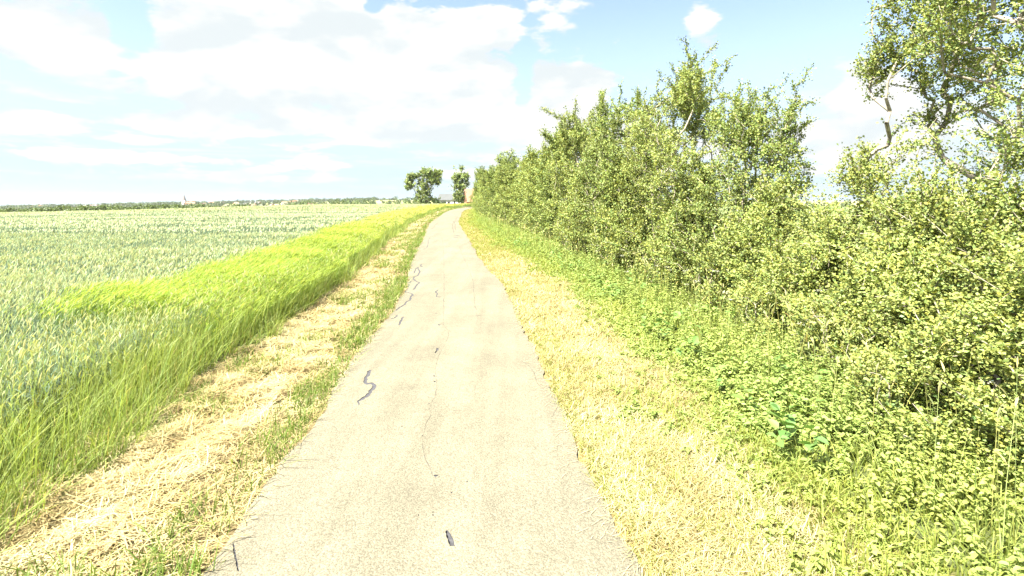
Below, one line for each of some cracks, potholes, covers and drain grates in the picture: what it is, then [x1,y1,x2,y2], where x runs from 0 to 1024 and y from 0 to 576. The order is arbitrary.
crack [392,226,438,325]
